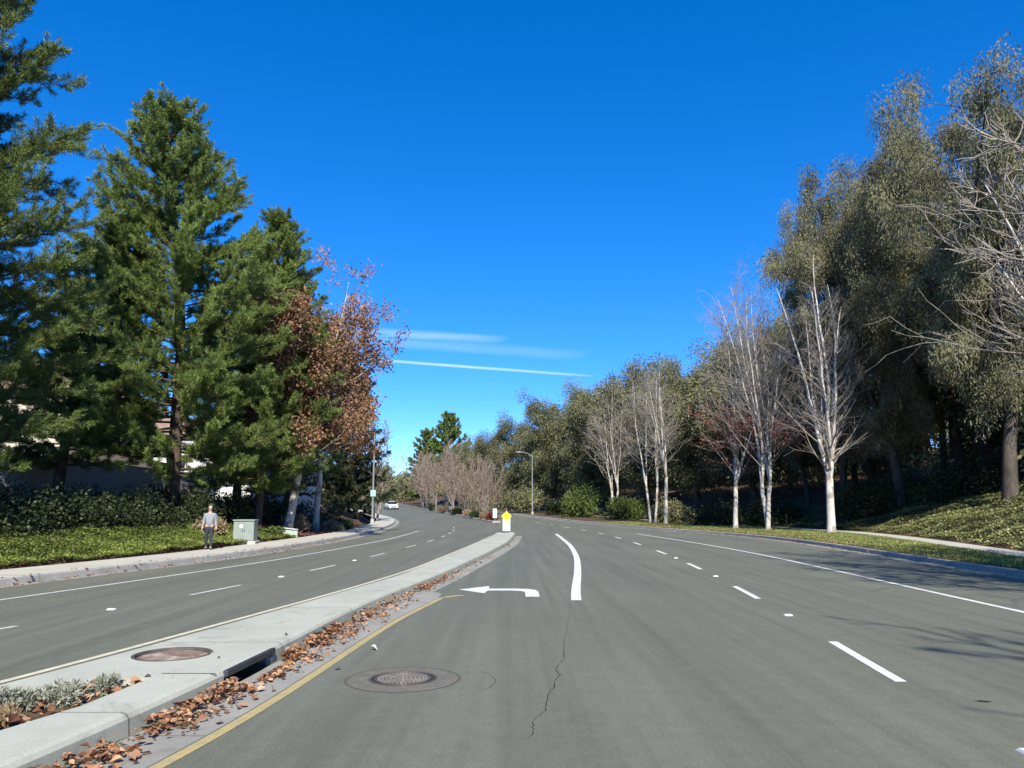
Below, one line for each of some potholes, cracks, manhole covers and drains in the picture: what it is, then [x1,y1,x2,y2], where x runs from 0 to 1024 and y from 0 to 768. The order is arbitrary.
crack [529,605,570,737]
manhole cover [131,647,218,662]
drain grate [223,648,276,688]
manhole cover [344,667,461,693]
